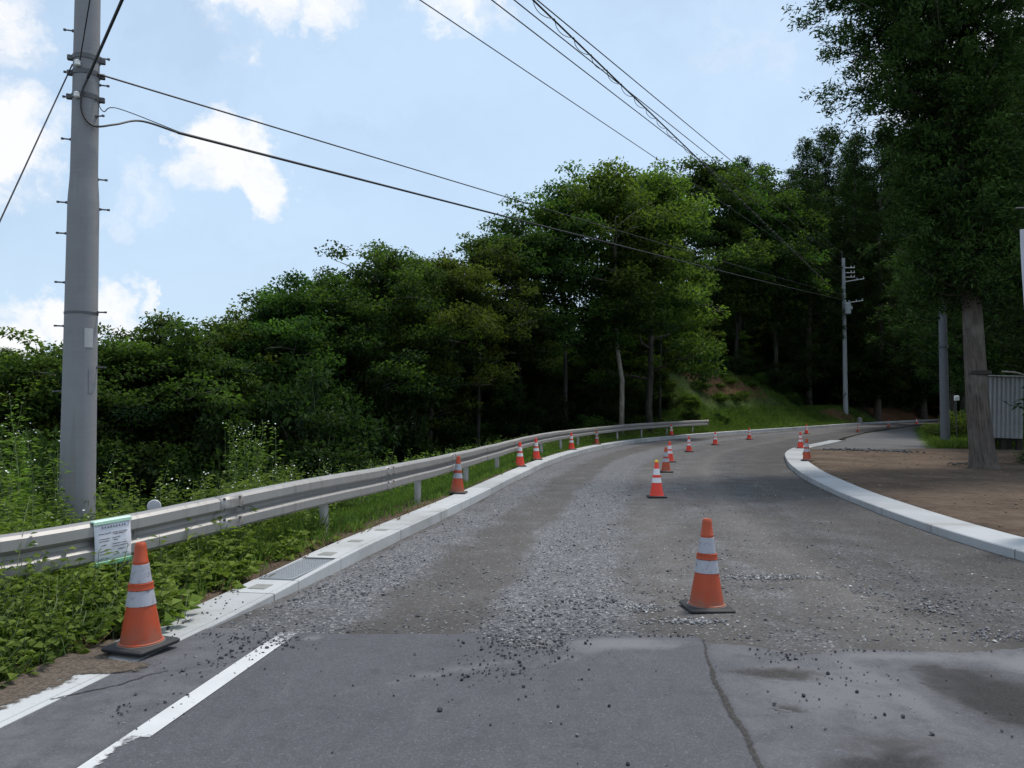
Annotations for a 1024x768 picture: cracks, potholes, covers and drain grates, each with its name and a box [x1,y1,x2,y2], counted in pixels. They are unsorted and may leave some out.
crack [703,640,763,768]
crack [51,670,168,699]
drain grate [259,559,333,581]
